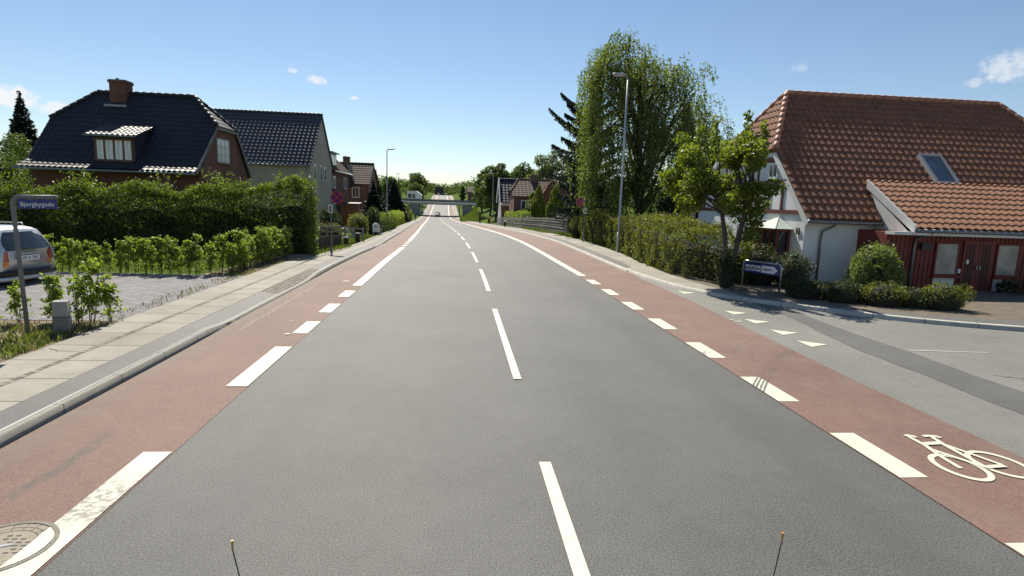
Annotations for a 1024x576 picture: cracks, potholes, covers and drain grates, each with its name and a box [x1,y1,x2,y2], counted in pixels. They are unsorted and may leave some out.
manhole cover [0,521,60,571]
